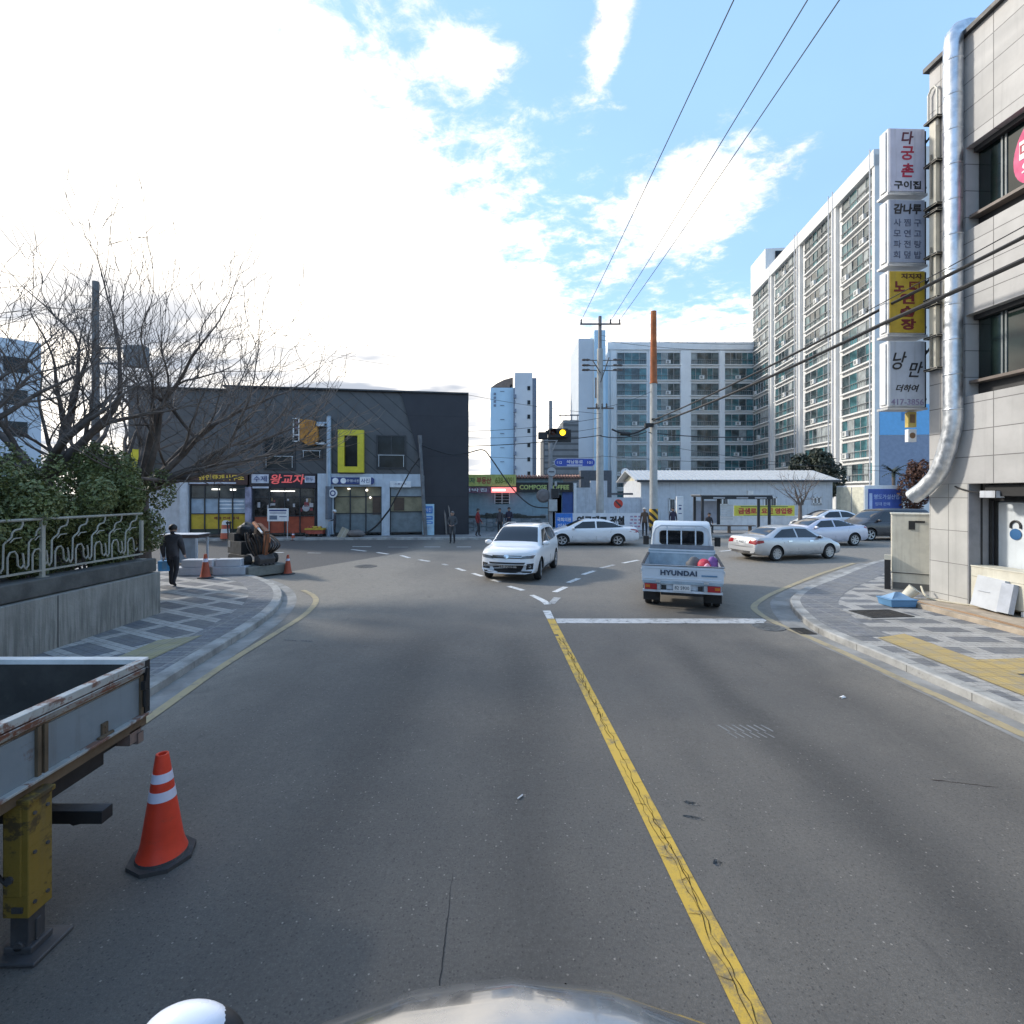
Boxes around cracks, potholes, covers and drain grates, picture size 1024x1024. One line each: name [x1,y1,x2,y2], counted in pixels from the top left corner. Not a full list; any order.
crack [439,878,453,986]
drain grate [849,609,915,618]
